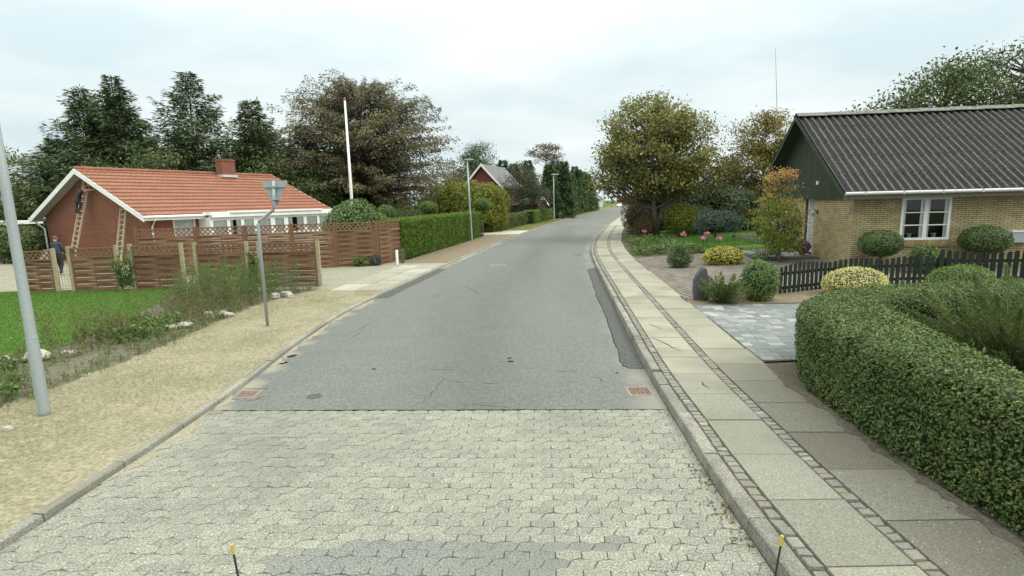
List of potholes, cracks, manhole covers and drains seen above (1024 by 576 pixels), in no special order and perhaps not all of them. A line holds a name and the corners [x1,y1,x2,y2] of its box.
drain grate [231,389,264,399]
drain grate [624,386,656,396]
